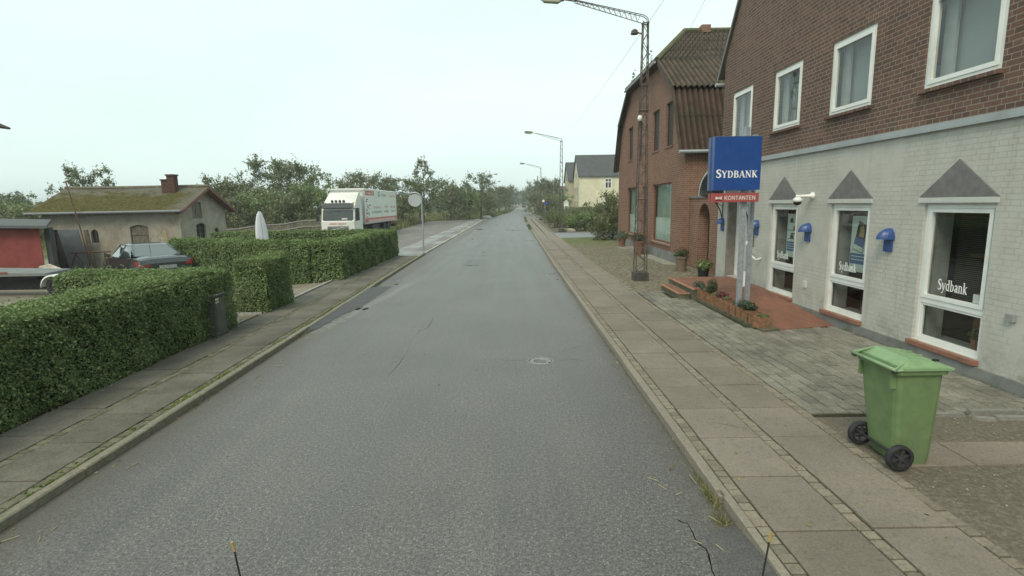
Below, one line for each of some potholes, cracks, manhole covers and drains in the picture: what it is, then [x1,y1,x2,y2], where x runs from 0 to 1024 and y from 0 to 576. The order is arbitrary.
crack [677,519,715,576]
manhole cover [527,357,554,365]
